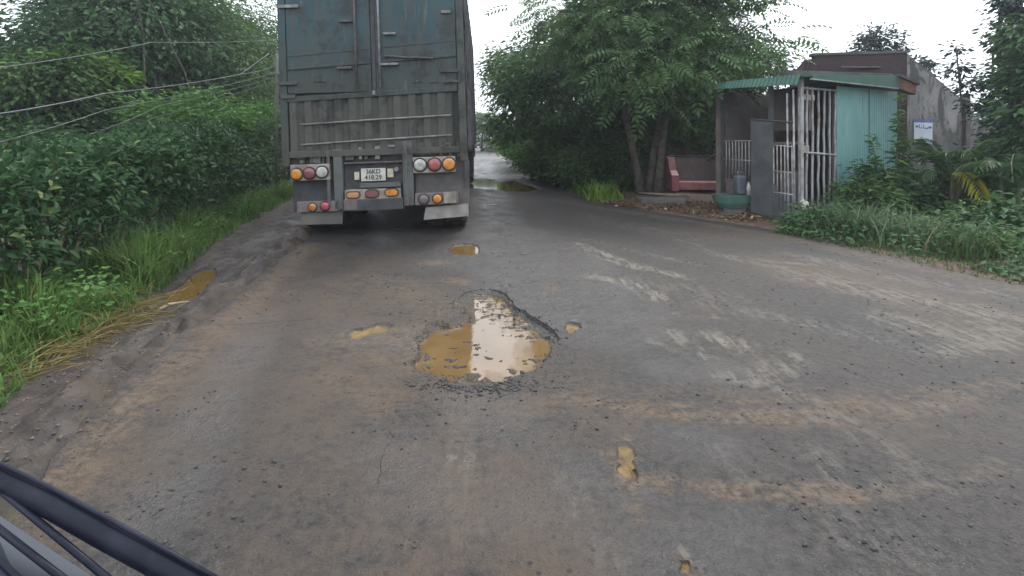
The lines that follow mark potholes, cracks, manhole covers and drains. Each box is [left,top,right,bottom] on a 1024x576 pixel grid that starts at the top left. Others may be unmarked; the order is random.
pothole [678,560,691,574]
pothole [344,322,394,340]
pothole [614,441,639,483]
pothole [564,321,582,333]
pothole [470,178,542,192]
pothole [448,243,480,256]
pothole [403,286,568,390]
pothole [161,268,217,304]
